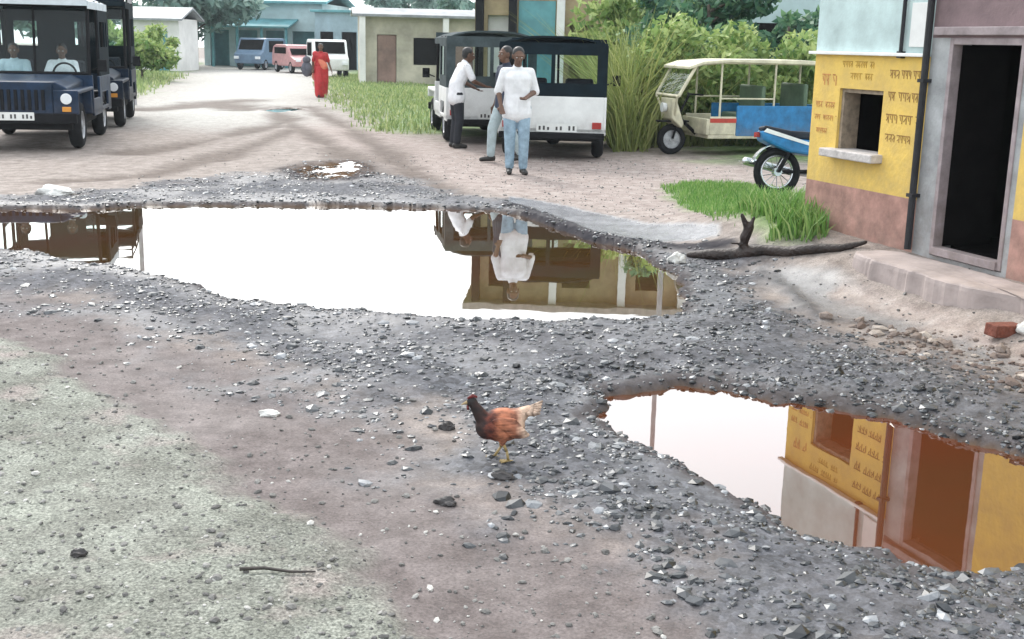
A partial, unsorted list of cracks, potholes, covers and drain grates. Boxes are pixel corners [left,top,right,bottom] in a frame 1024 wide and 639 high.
pothole [586,376,1024,575]
pothole [285,161,368,180]
pothole [0,200,690,320]
